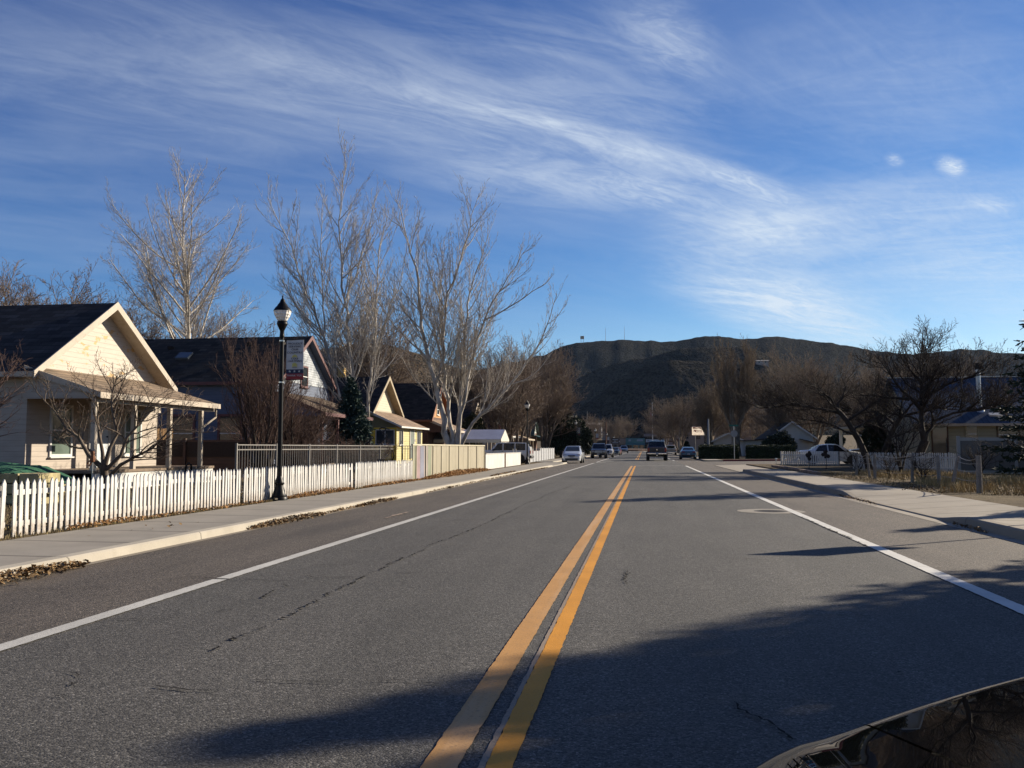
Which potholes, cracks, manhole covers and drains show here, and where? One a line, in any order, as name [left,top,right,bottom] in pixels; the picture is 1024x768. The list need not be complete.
crack [736,702,793,739]
